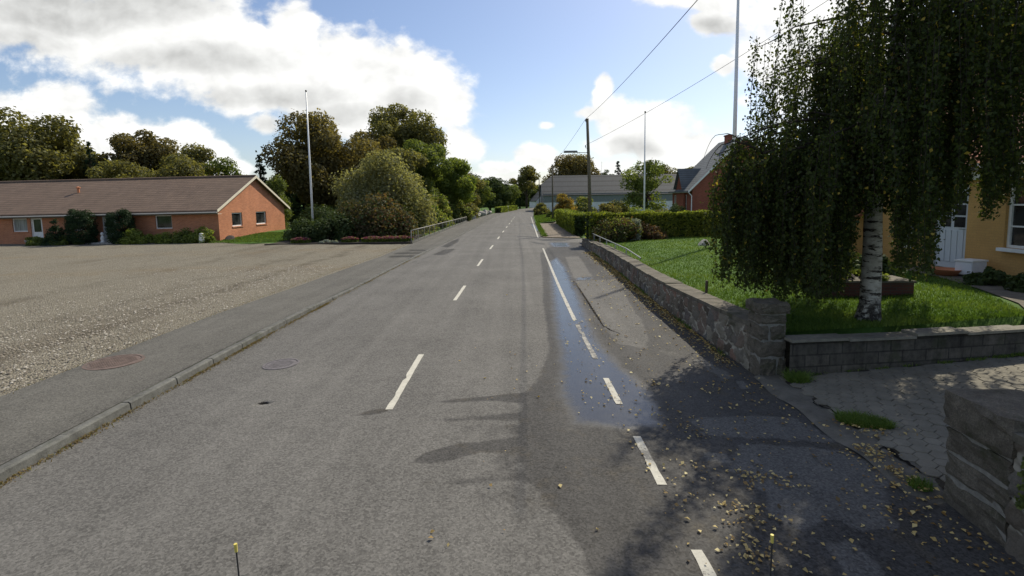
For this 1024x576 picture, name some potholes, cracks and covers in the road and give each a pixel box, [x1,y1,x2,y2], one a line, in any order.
crack [878,440,921,473]
manhole cover [82,354,145,370]
manhole cover [262,358,300,370]
